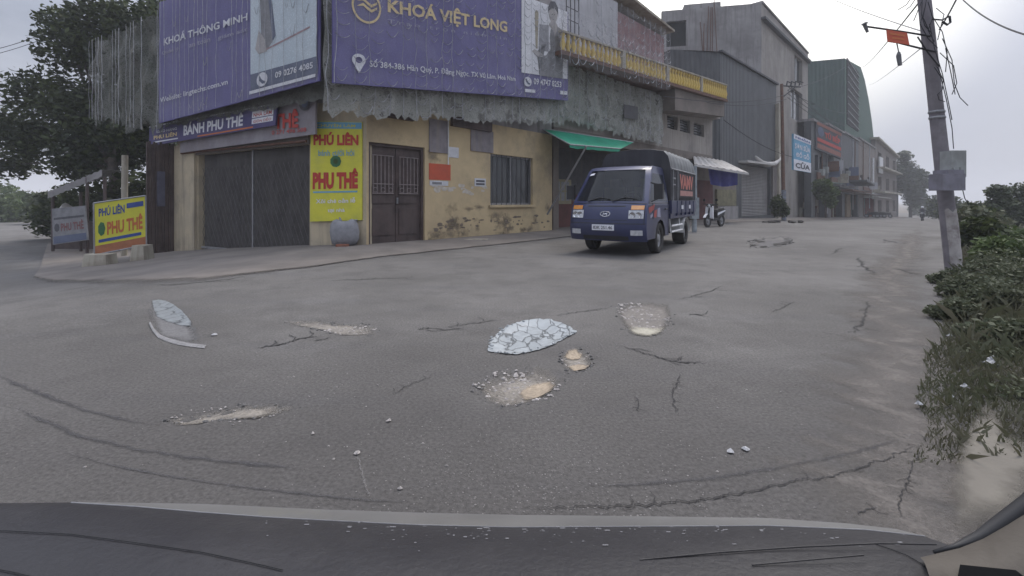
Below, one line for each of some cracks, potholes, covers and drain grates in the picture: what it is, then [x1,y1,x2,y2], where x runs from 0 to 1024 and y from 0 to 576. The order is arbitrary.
crack [261,330,330,348]
pothole [470,367,566,408]
pothole [610,302,676,340]
pothole [163,403,302,425]
crack [533,435,925,517]
pothole [558,348,595,374]
crack [850,302,877,332]
crack [624,346,705,409]
pothole [284,320,380,336]
